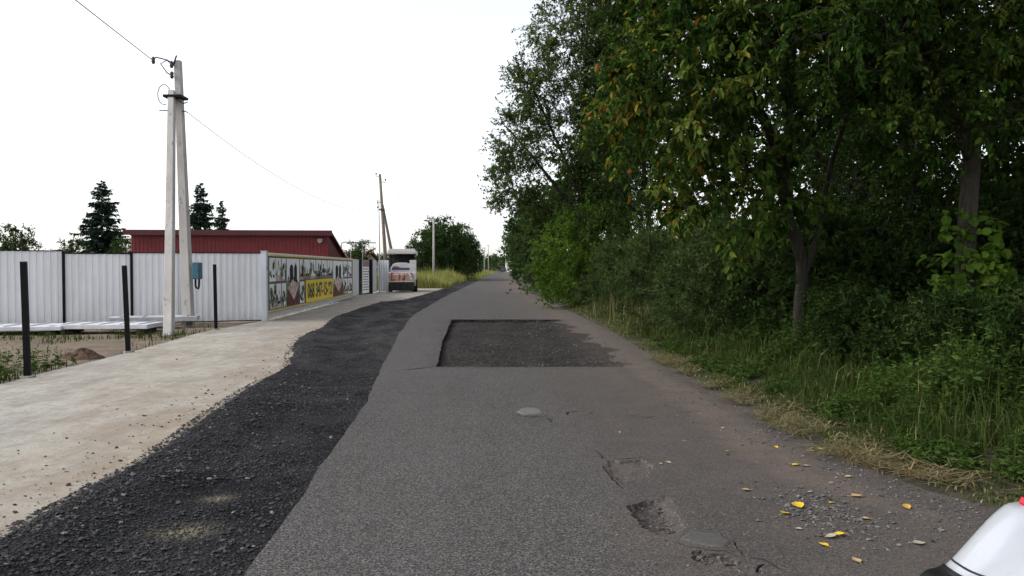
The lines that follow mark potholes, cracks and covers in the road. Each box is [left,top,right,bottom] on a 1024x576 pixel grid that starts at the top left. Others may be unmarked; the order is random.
crack [517,411,593,423]
pothole [626,496,686,535]
crack [594,450,650,489]
pothole [606,460,653,485]
crack [675,540,786,574]
pothole [691,550,744,567]
